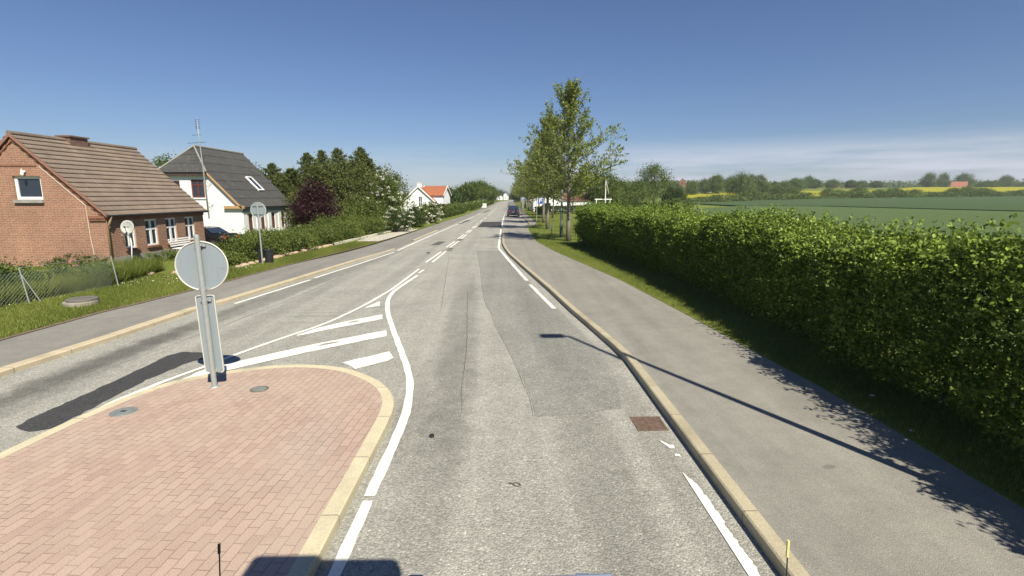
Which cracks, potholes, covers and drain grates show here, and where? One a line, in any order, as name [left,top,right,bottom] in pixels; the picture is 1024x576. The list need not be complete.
crack [460,248,533,416]
manhole cover [109,407,138,417]
